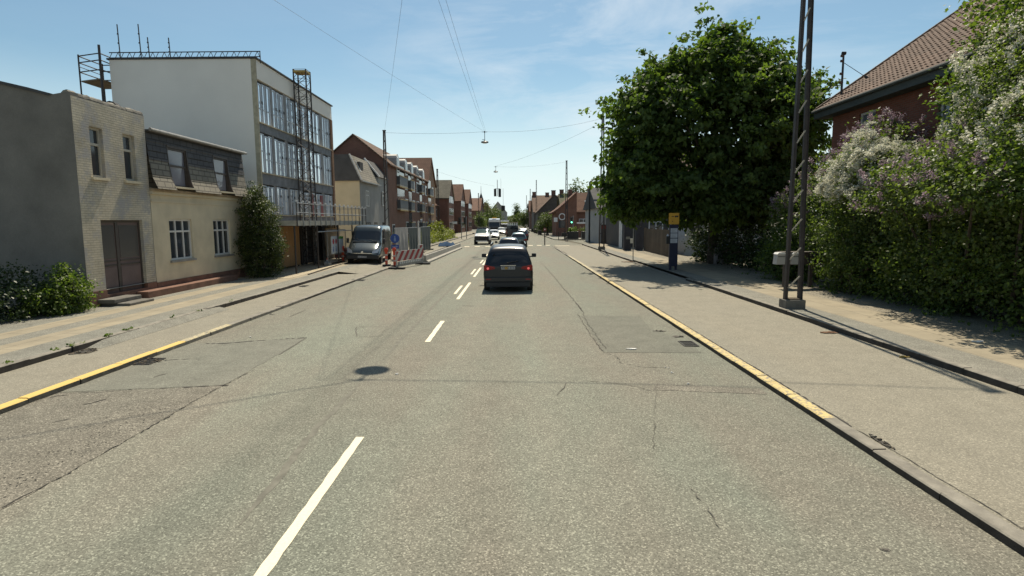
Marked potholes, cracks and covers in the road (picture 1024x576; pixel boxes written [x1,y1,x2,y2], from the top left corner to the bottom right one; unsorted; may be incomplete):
crack [53,359,226,422]
crack [544,266,663,368]
